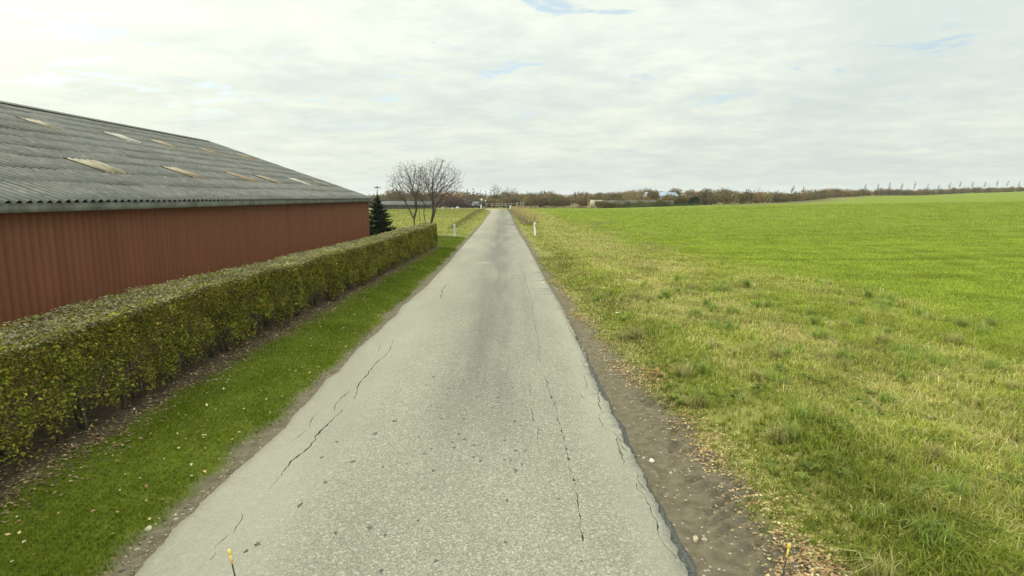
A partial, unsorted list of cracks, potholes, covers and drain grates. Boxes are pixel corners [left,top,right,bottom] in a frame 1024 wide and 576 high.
crack [563,311,675,555]
crack [273,340,394,485]
